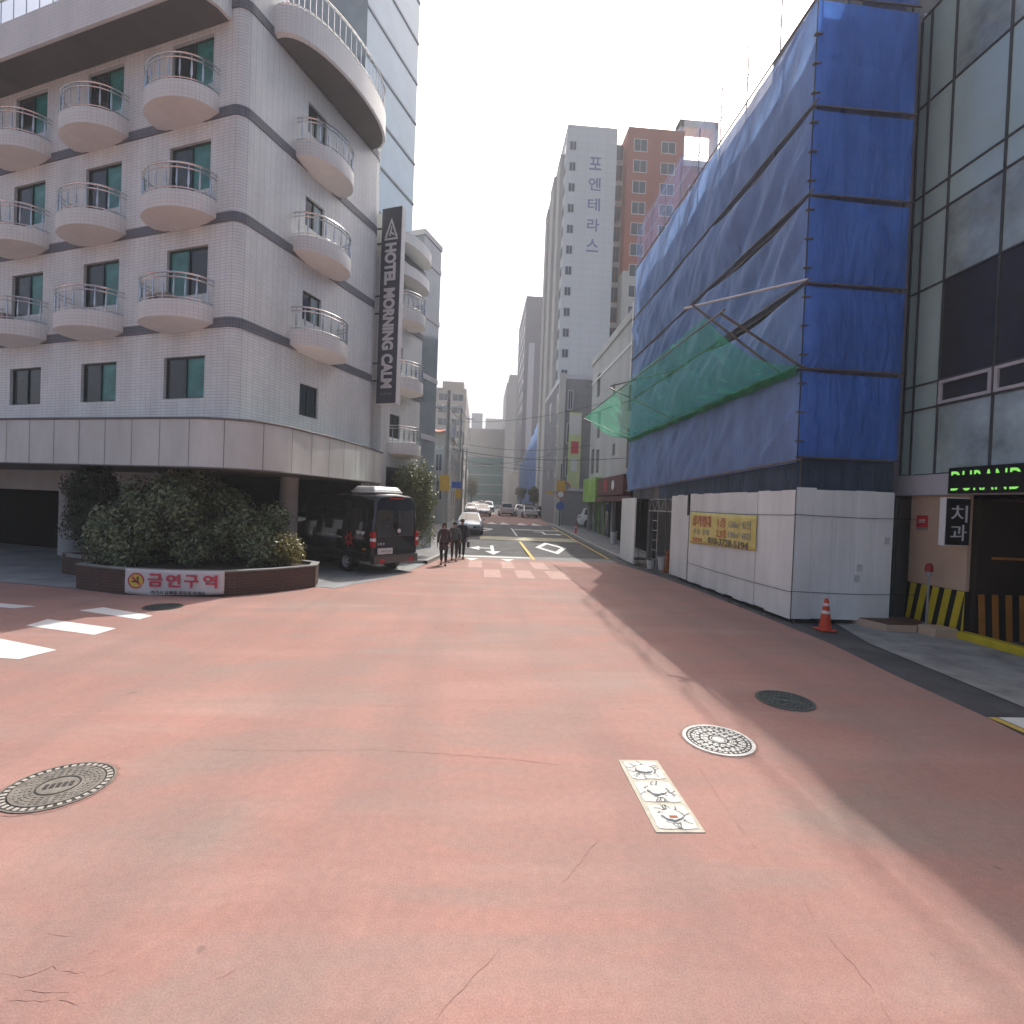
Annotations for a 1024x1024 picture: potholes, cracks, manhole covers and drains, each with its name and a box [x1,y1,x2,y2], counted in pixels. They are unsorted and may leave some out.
crack [802,893,890,1019]
crack [437,954,495,1018]
manhole cover [679,724,759,759]
manhole cover [0,761,122,817]
manhole cover [140,603,185,611]
crack [4,931,117,1005]
manhole cover [752,690,819,712]
